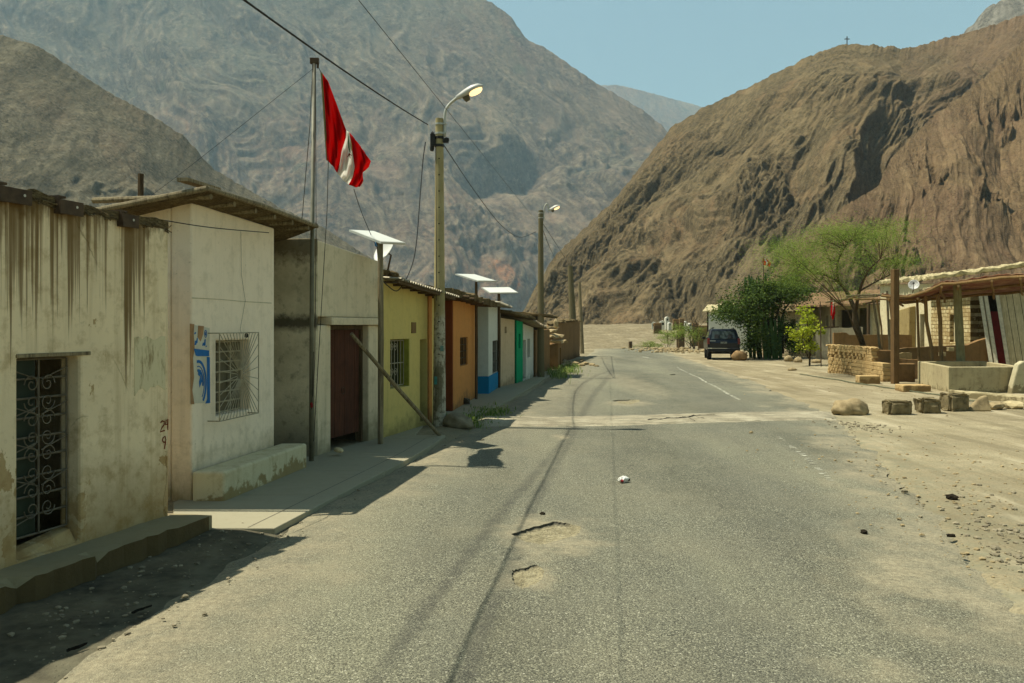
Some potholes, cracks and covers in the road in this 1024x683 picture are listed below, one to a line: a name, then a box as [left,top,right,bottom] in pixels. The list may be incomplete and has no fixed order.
pothole [512,565,544,589]
pothole [512,522,581,545]
